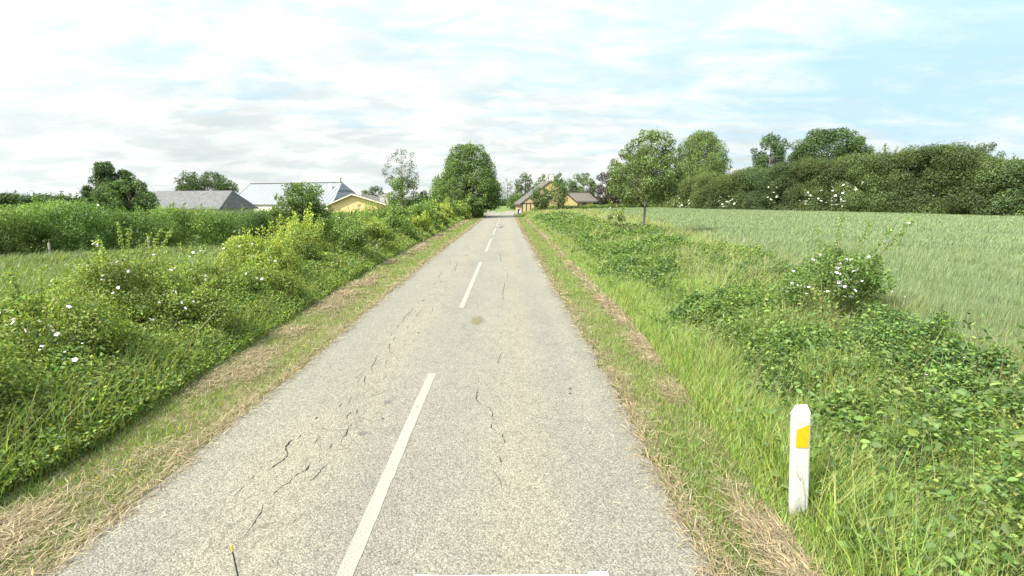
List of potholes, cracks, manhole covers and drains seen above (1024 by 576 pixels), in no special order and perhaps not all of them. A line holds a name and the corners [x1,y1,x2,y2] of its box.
crack [476,380,506,487]
crack [233,301,433,532]
